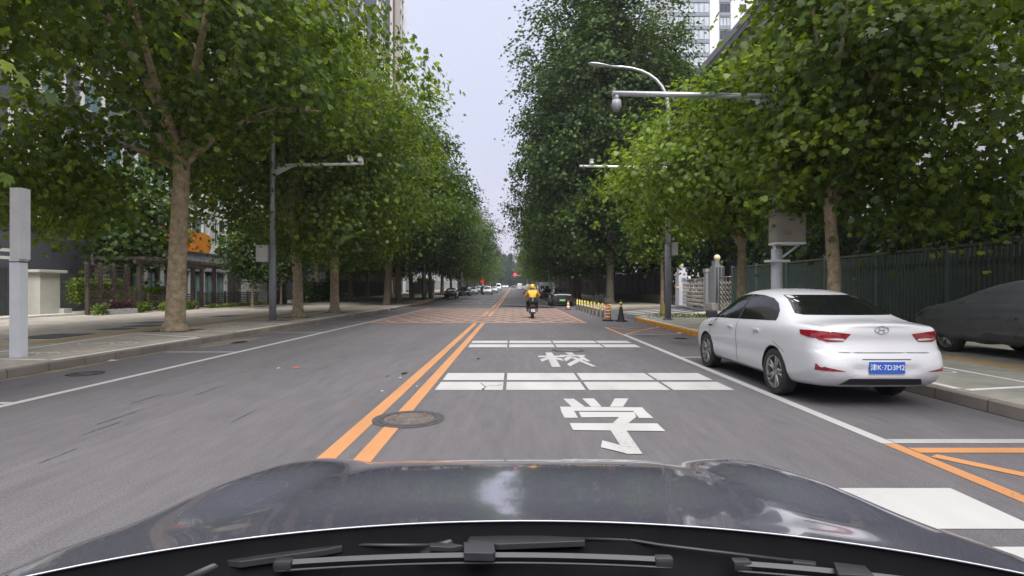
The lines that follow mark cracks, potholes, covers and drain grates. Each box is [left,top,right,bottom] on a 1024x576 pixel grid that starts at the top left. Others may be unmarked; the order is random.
manhole cover [372,411,445,428]
